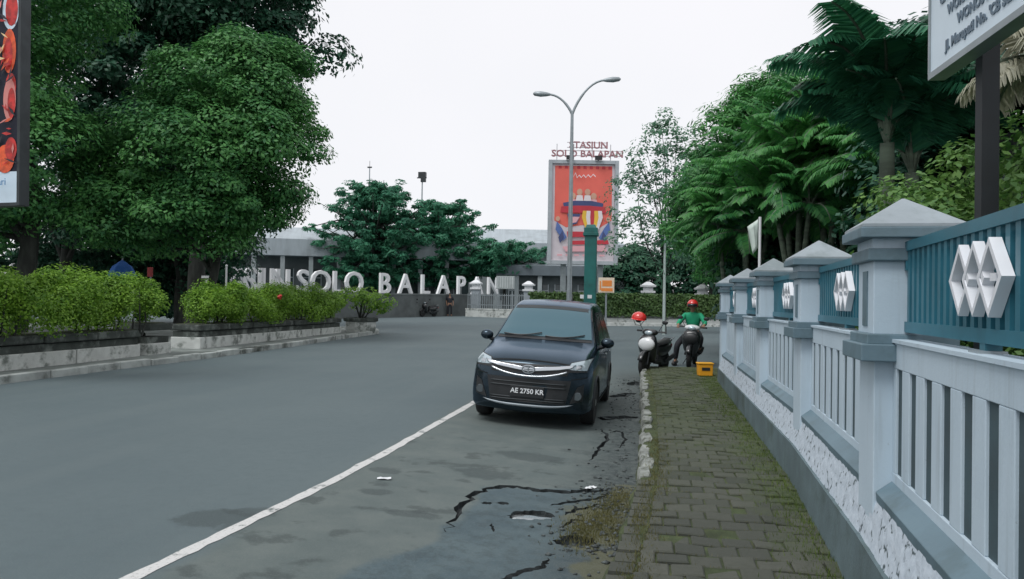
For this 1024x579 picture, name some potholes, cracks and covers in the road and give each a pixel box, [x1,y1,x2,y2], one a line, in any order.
pothole [507,510,554,520]
crack [590,415,638,460]
crack [443,485,613,532]
crack [502,558,550,579]
